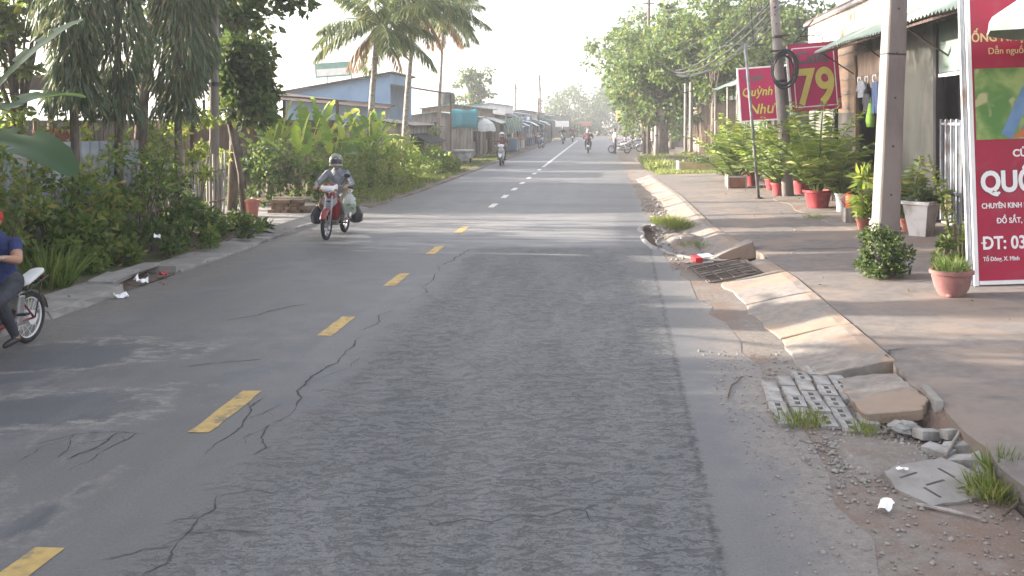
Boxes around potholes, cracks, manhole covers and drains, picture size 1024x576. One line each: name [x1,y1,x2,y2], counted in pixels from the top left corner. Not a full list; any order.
crack [422,505,630,526]
drain grate [689,257,764,283]
drain grate [82,262,178,292]
crack [102,484,274,573]
crack [21,431,138,470]
crack [206,250,468,455]
